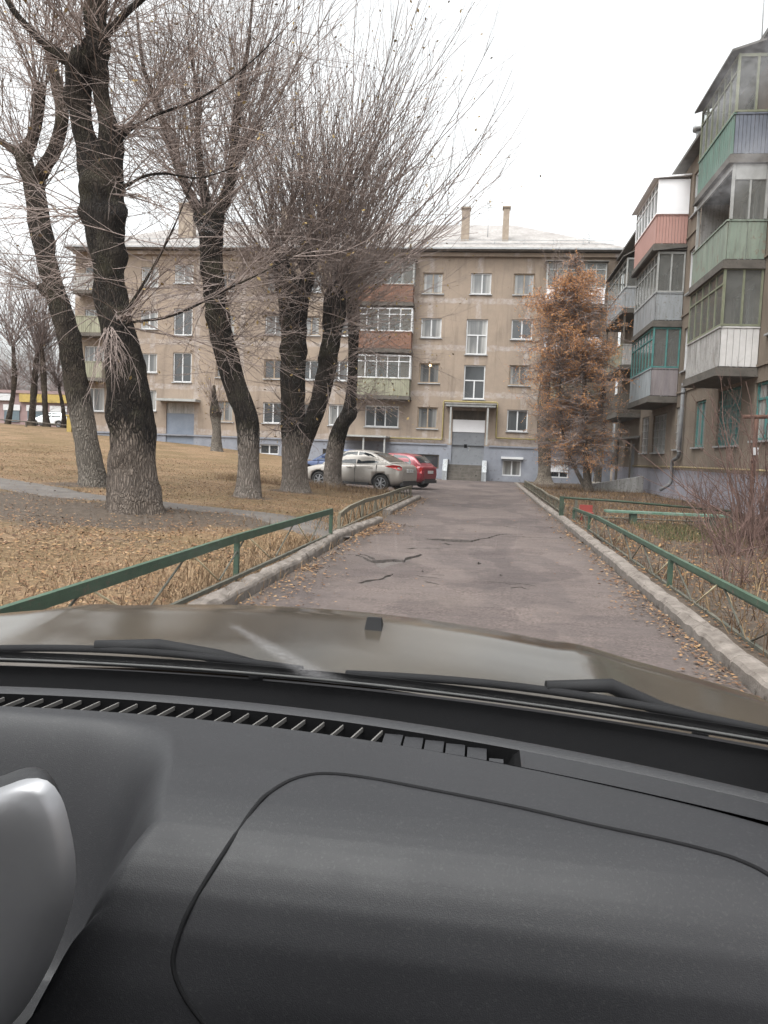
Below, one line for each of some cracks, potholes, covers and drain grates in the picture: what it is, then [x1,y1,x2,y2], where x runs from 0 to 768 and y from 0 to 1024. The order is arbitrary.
crack [360,574,393,584]
